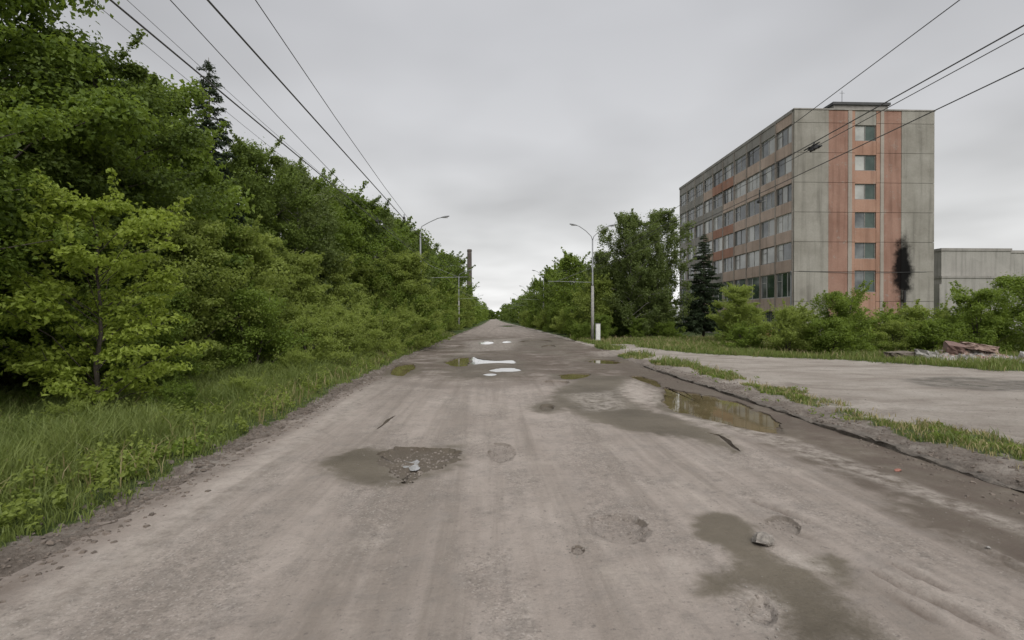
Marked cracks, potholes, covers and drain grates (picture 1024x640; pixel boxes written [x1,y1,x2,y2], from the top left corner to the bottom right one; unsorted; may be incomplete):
crack [710,433,740,451]
pothole [571,545,585,555]
pothole [376,446,463,484]
pothole [486,442,517,464]
pothole [390,364,415,376]
pothole [661,387,786,434]
pothole [583,512,653,545]
pothole [764,515,802,536]
pothole [444,357,471,367]
pothole [741,594,780,628]
